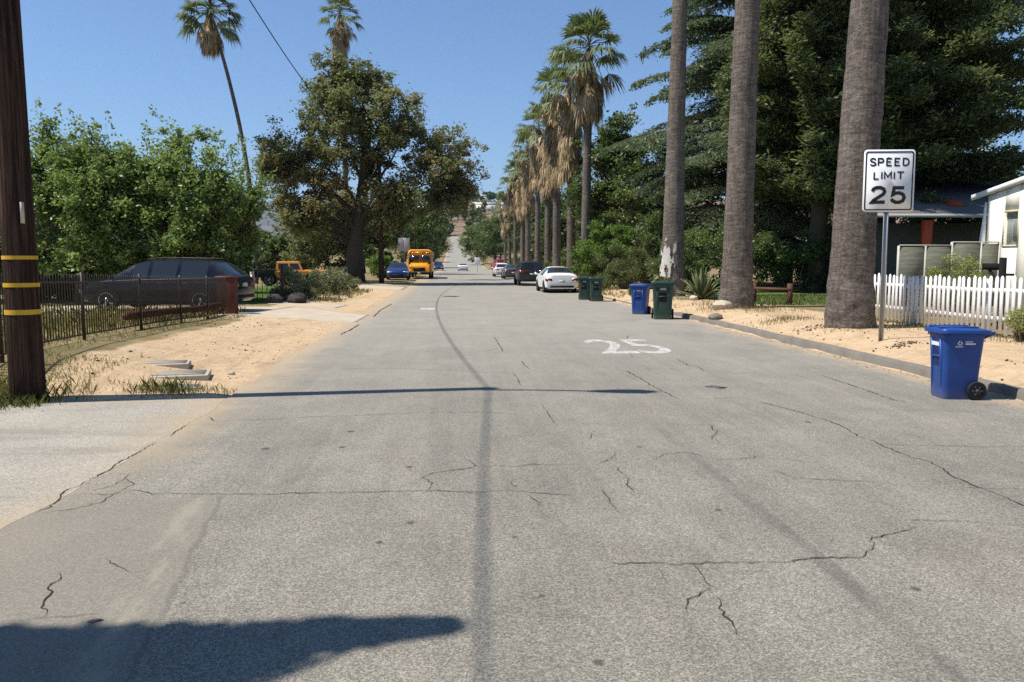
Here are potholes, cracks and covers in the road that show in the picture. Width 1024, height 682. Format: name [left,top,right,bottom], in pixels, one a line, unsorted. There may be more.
crack [656,426,865,481]
crack [611,519,1013,629]
crack [35,425,566,513]
crack [755,378,1023,505]
crack [2,559,127,622]
